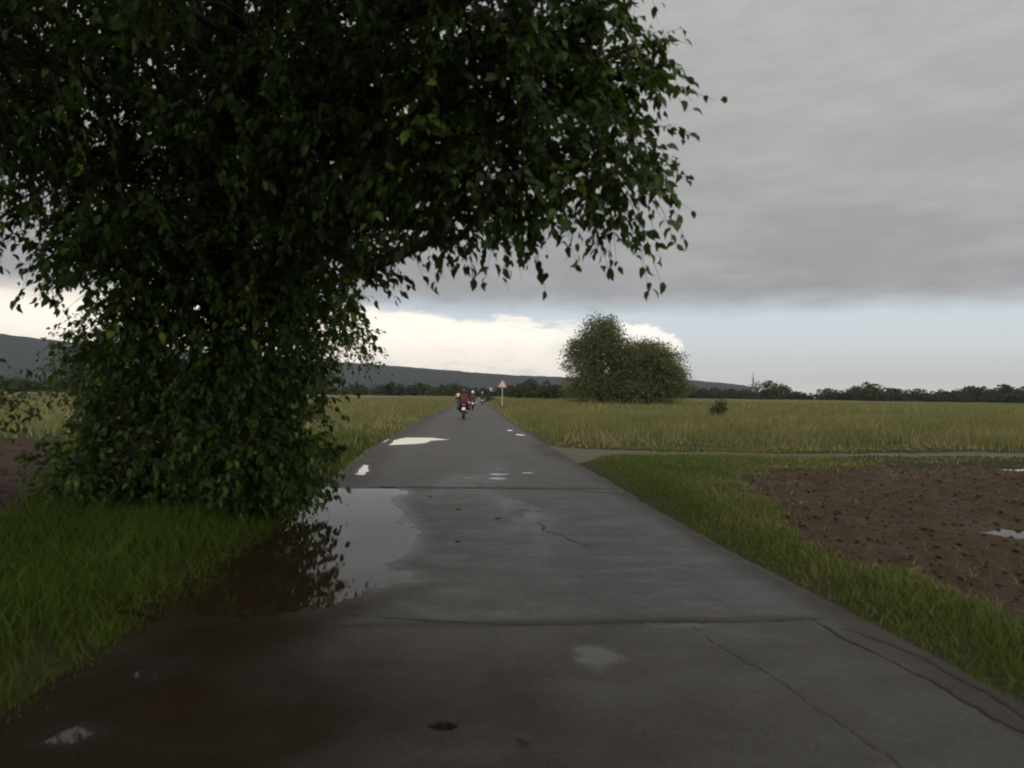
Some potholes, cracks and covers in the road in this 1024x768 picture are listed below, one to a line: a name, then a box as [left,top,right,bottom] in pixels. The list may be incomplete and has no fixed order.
pothole [416,717,471,736]
crack [351,486,623,546]
